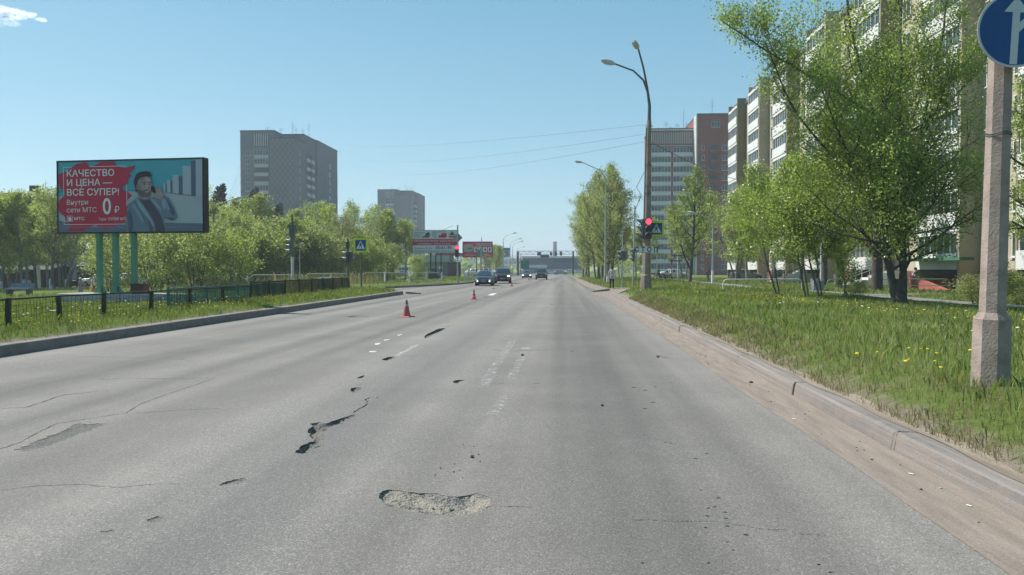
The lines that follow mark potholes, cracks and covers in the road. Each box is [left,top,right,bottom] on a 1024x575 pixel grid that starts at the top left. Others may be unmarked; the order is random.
pothole [295,415,355,454]
crack [0,378,215,449]
pothole [379,490,492,516]
pothole [14,423,102,452]
crack [635,519,832,537]
